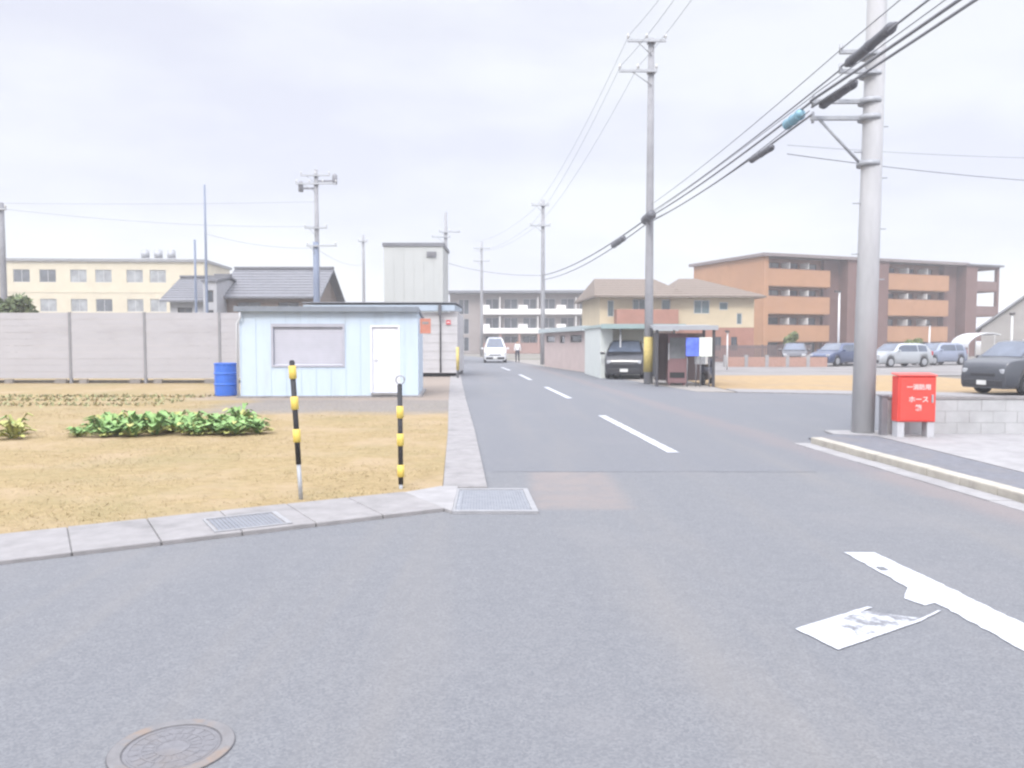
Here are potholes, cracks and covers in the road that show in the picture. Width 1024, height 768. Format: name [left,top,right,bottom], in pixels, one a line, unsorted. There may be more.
drain grate [202,511,292,533]
manhole cover [105,719,235,768]
drain grate [452,488,539,514]
